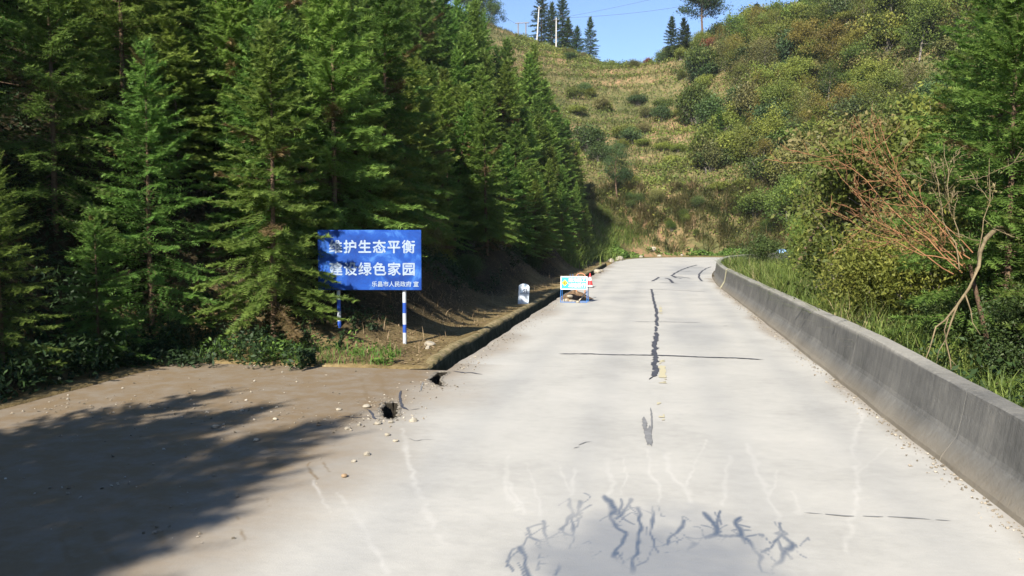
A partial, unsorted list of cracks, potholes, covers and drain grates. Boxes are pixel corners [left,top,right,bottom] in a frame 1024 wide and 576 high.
crack [642,407,653,446]
pothole [377,401,402,420]
pothole [427,371,450,387]
